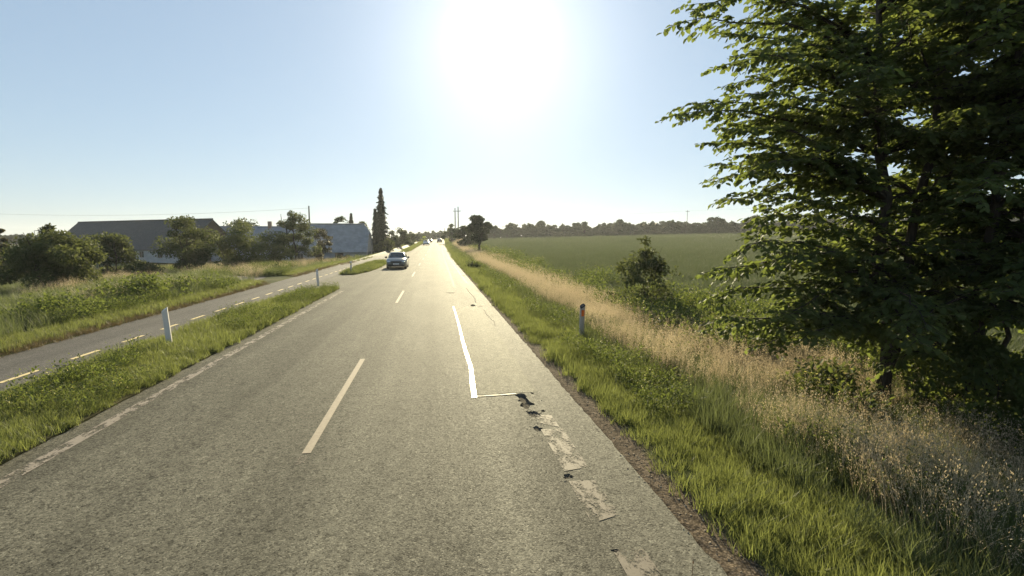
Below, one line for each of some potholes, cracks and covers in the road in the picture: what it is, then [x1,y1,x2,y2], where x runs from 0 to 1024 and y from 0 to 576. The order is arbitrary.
pothole [515,393,534,409]
